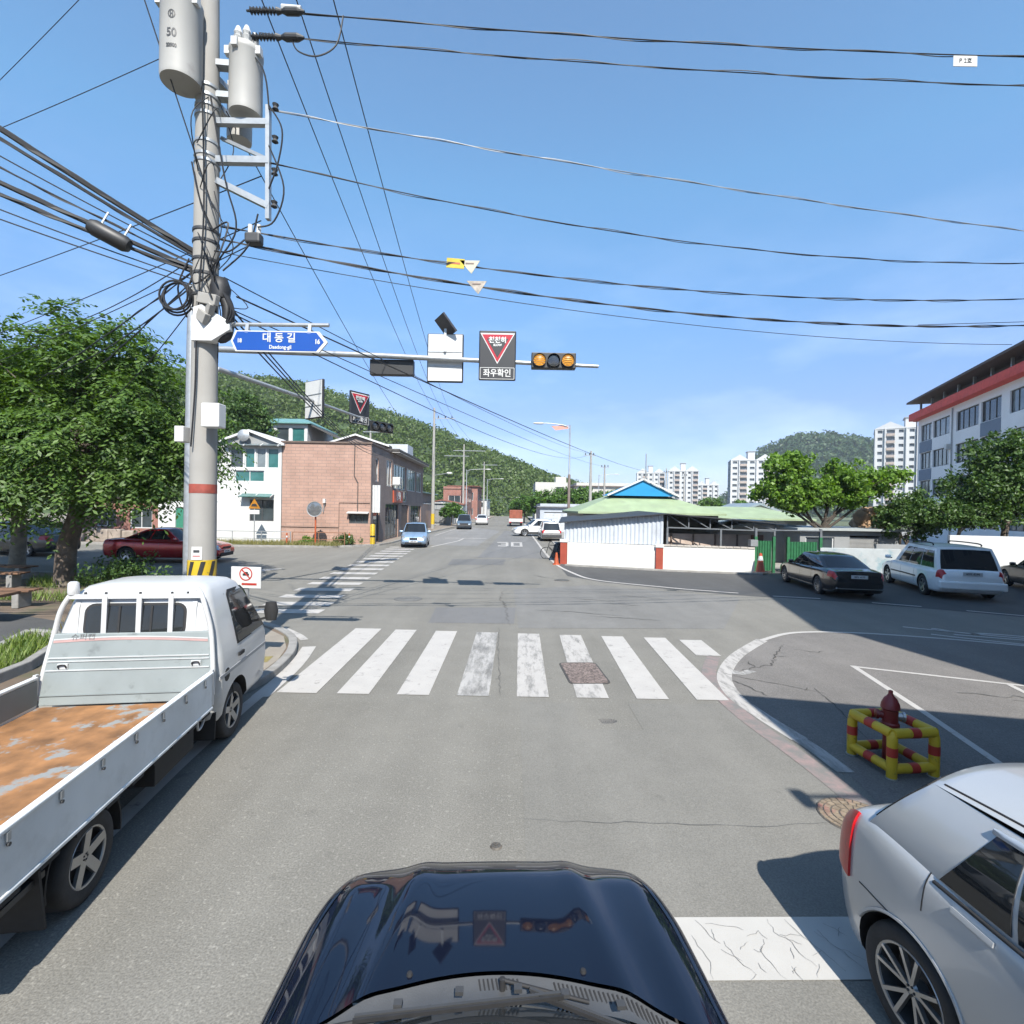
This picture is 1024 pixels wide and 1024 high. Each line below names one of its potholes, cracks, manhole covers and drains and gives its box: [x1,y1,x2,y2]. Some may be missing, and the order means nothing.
crack [524,818,824,827]
crack [725,646,869,740]
manhole cover [815,797,869,829]
crack [490,594,508,691]
manhole cover [559,662,610,684]
